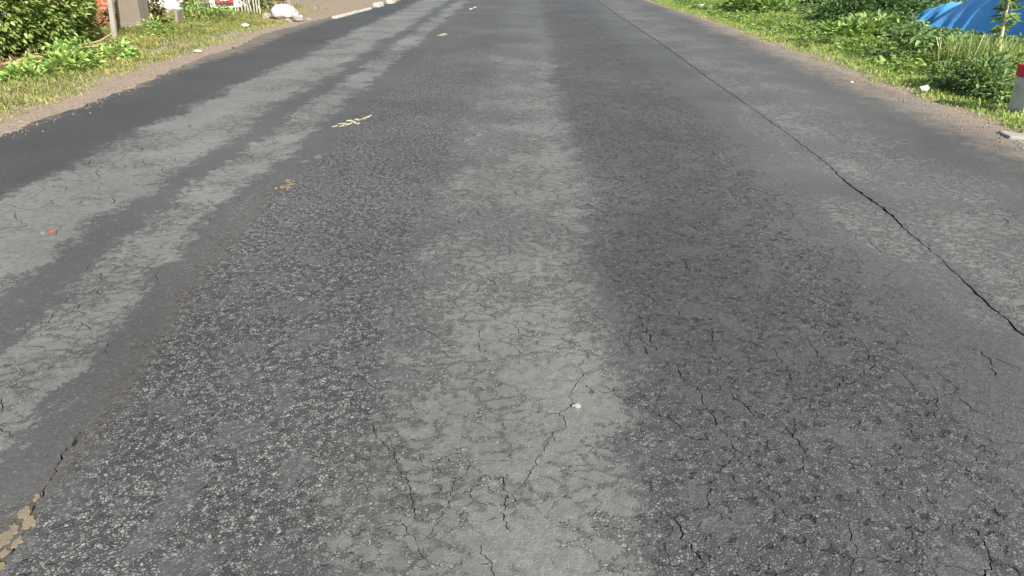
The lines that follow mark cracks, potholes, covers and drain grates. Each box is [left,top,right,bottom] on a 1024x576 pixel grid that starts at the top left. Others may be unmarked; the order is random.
crack [583,96,1024,576]
crack [289,48,684,565]
crack [715,58,1024,253]
